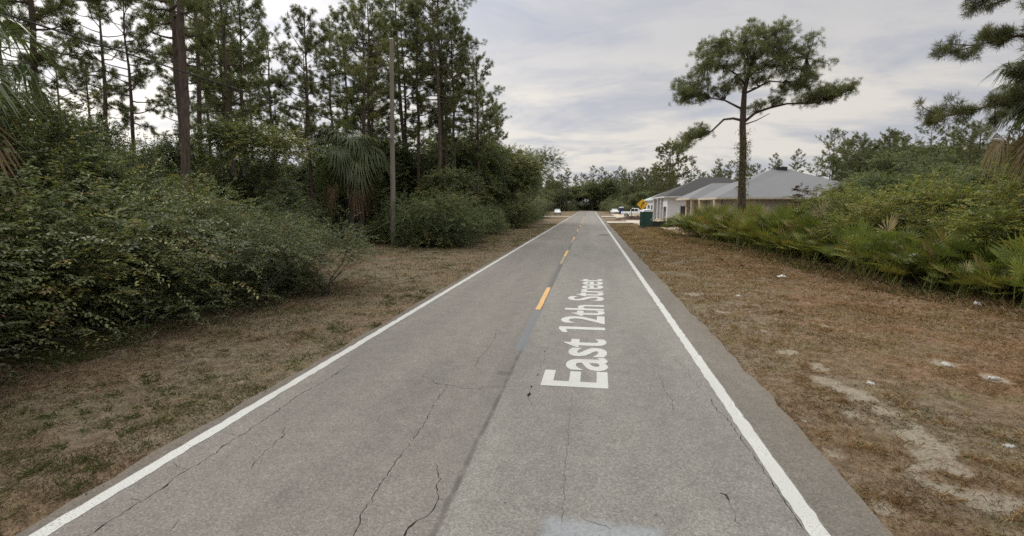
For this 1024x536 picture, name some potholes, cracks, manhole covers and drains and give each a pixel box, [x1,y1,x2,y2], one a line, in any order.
crack [353,351,546,536]
crack [88,367,346,536]
